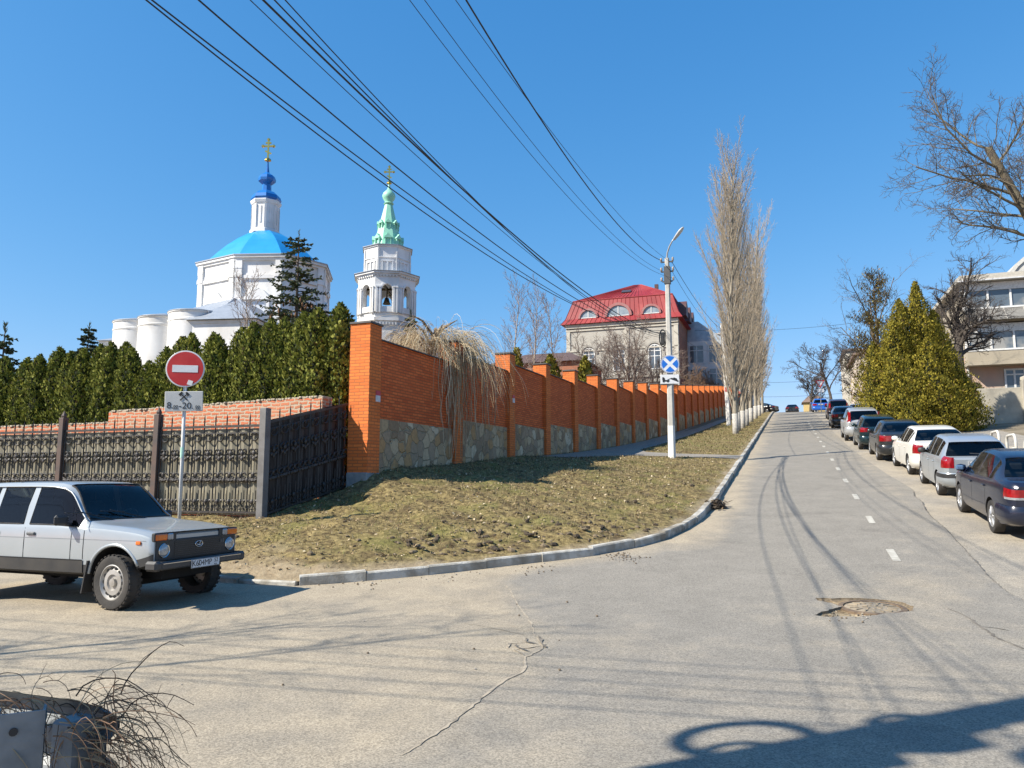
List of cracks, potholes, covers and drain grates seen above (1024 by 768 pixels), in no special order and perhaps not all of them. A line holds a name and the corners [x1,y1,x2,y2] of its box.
manhole cover [838,600,908,616]
crack [948,608,1024,649]
